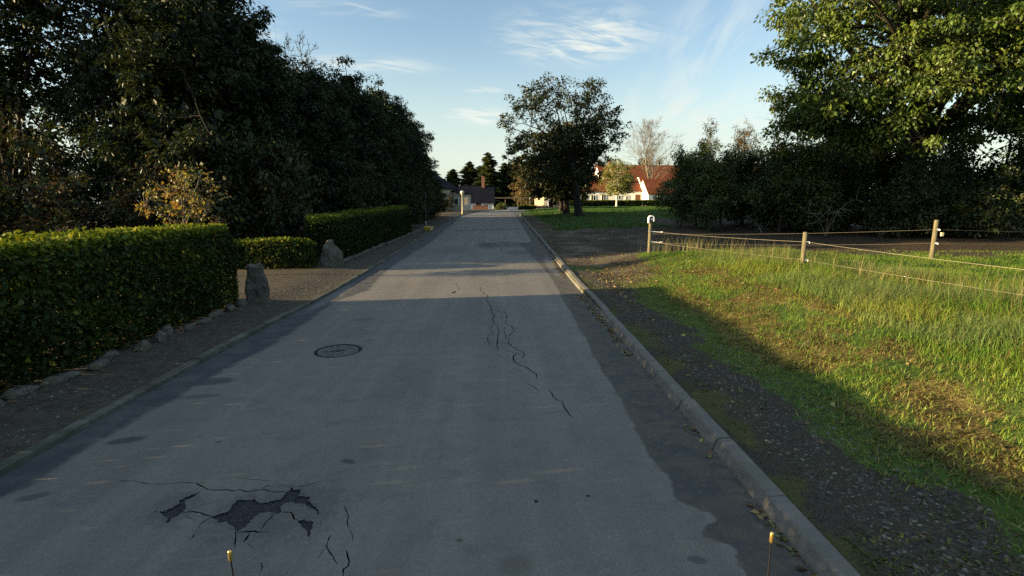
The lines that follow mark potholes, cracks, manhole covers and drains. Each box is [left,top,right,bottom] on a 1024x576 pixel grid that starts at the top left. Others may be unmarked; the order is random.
pothole [298,516,317,544]
manhole cover [313,345,362,358]
crack [480,287,572,417]
pothole [154,490,206,526]
pothole [213,484,321,532]
crack [135,477,319,549]
crack [317,506,353,576]
